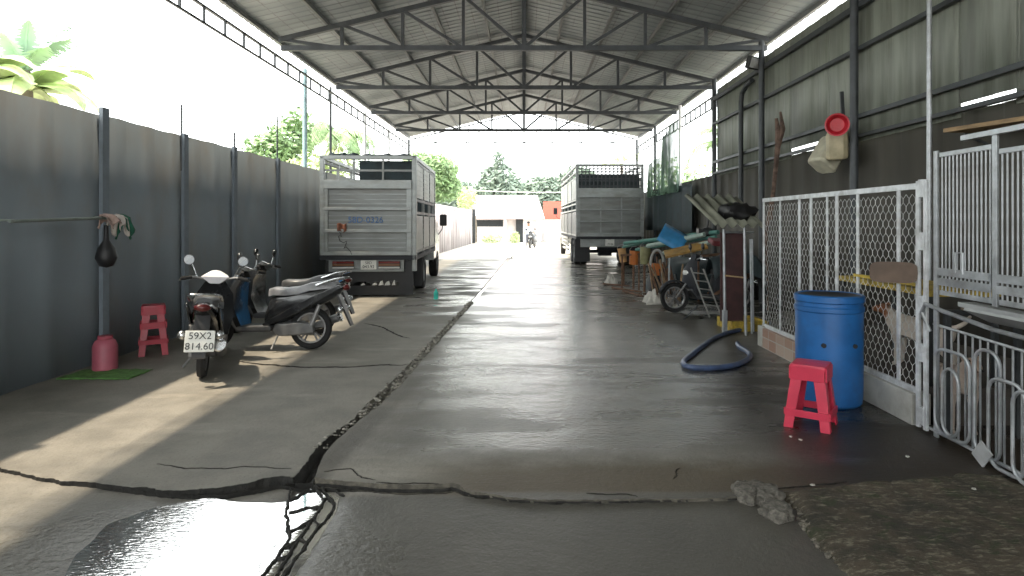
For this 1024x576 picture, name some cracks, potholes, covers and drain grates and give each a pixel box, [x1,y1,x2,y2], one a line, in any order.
crack [0,259,1024,576]
